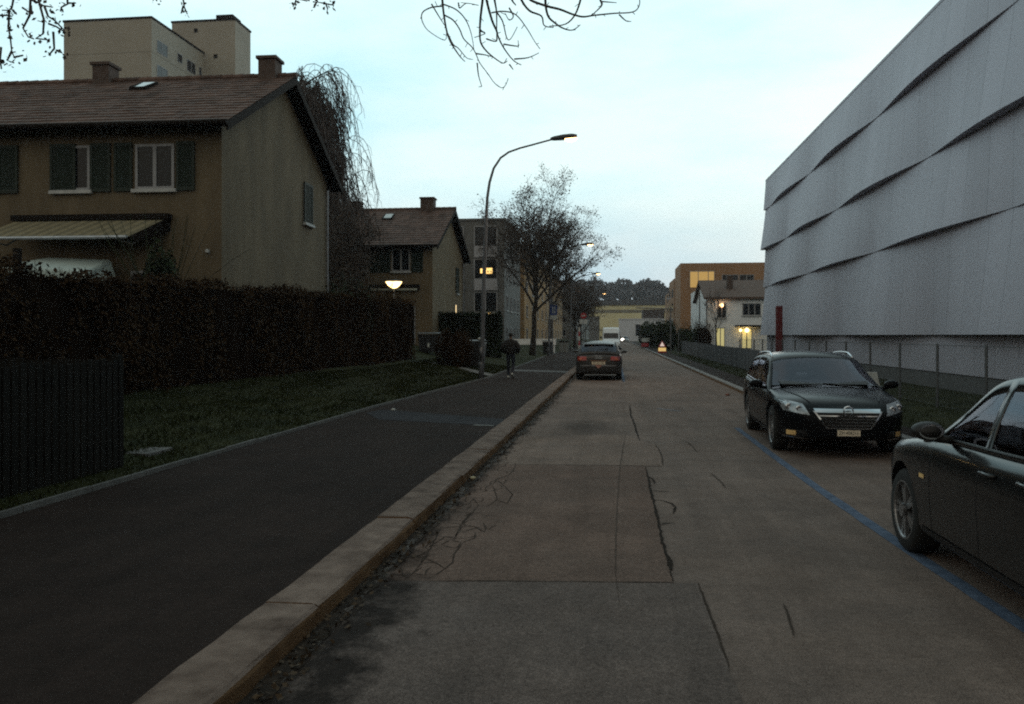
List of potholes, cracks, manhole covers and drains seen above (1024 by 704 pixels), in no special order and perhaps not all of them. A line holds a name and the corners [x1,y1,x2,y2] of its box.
crack [391,461,516,577]
crack [783,603,795,636]
crack [629,405,663,464]
crack [698,583,730,668]
